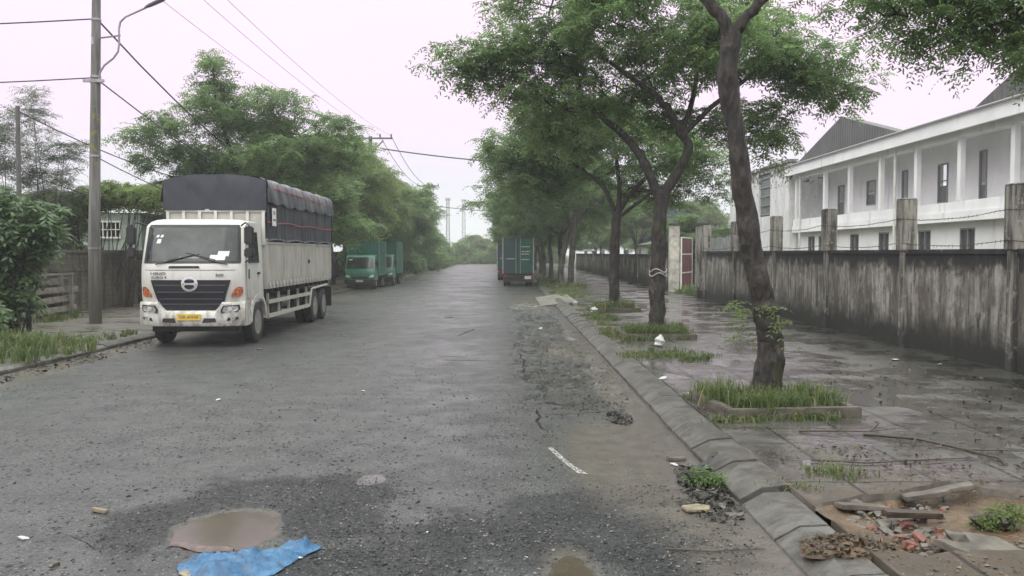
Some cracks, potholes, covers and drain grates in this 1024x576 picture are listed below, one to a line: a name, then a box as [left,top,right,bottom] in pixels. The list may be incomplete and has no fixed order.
pothole [545,551,597,576]
crack [518,311,608,433]
pothole [166,507,284,553]
